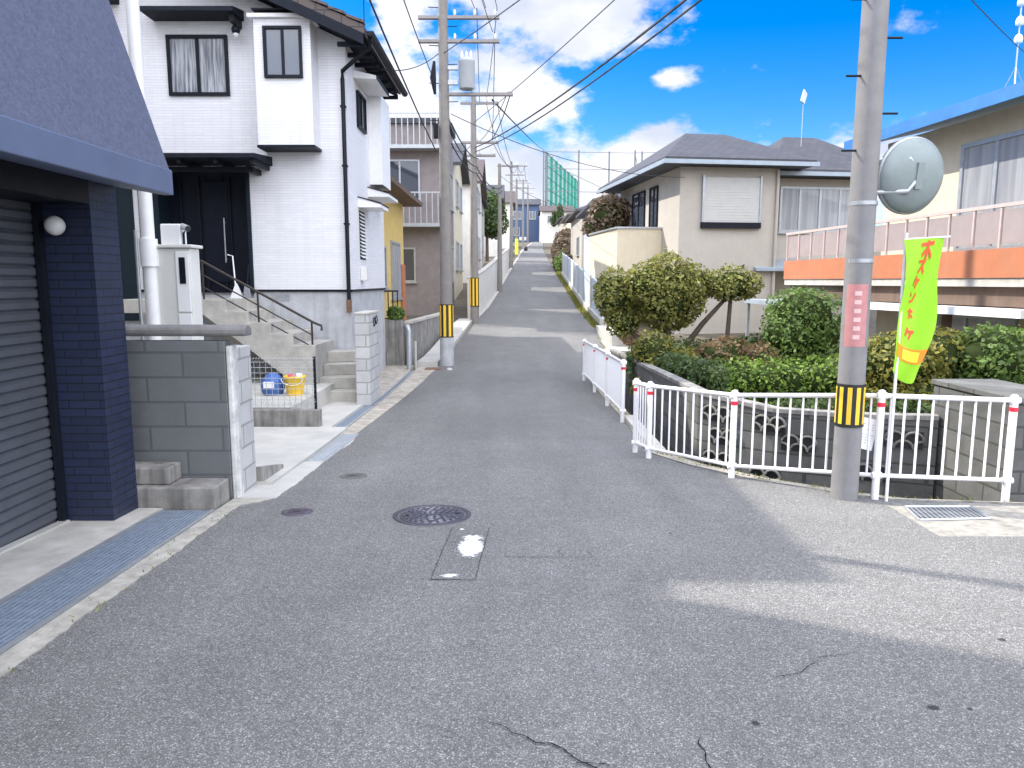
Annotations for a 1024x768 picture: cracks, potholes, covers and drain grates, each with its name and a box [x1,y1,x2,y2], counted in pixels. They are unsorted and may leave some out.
drain grate [904,505,992,521]
crack [480,718,611,768]
manhole cover [393,505,471,526]
utility cover [281,508,313,516]
